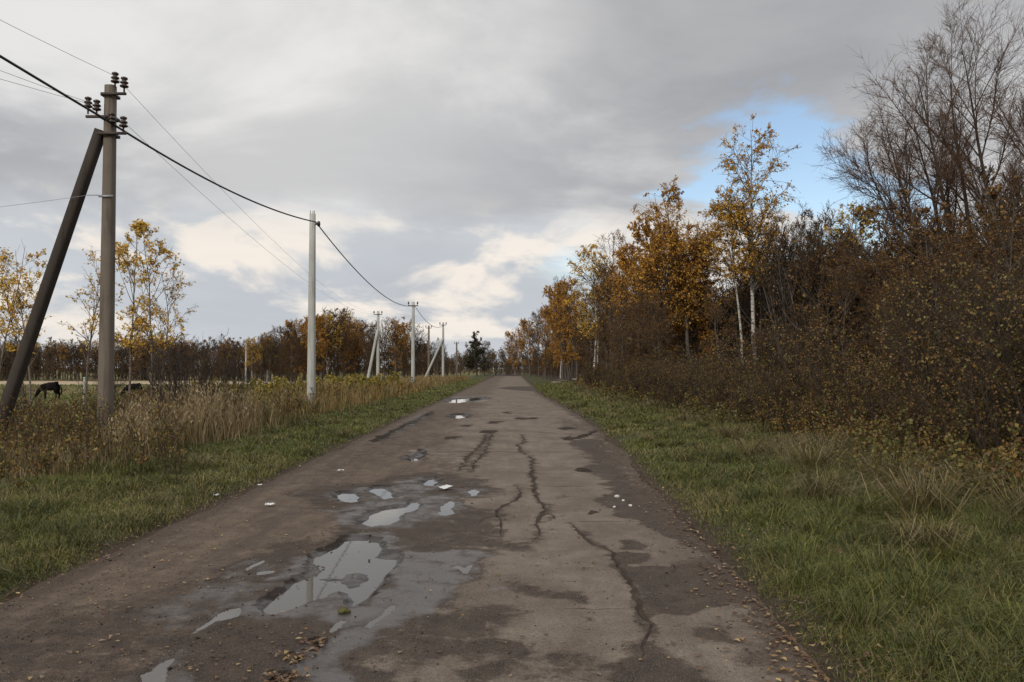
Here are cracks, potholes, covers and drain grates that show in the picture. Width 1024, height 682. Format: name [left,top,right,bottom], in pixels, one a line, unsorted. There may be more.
pothole [250,534,405,615]
pothole [353,498,424,527]
pothole [405,449,429,461]
crack [457,431,655,661]
